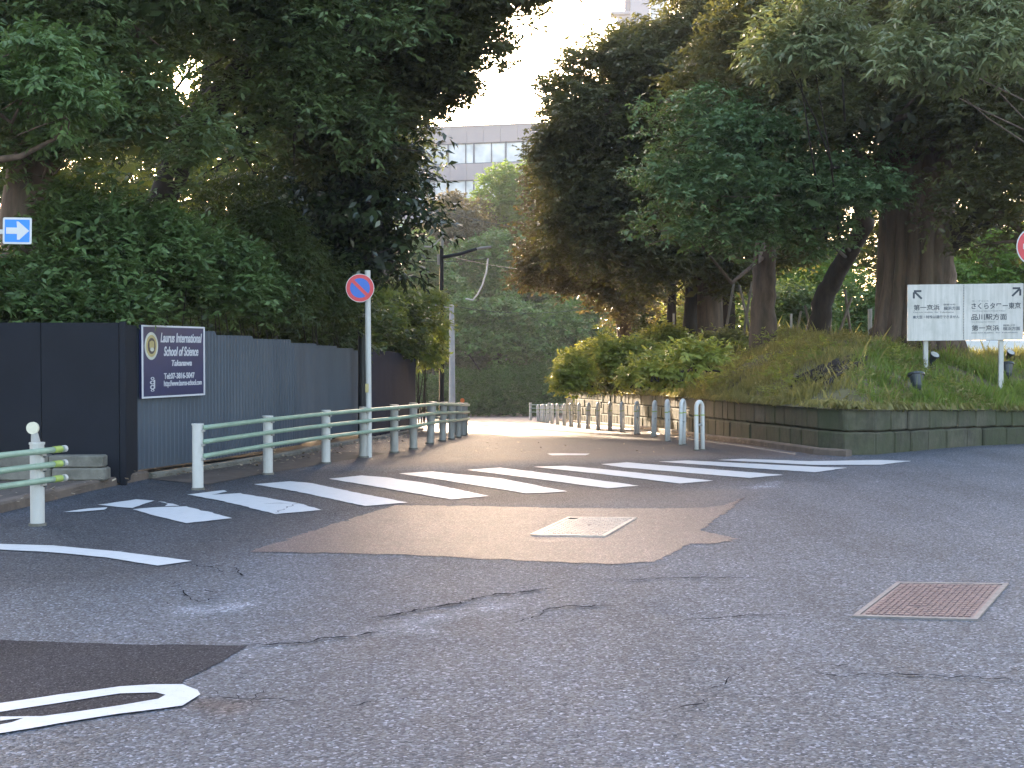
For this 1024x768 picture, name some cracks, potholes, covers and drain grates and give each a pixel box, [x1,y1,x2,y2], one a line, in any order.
crack [822,664,1020,682]
crack [662,665,747,711]
crack [372,588,661,623]
crack [160,564,243,604]
crack [685,605,809,620]
manhole cover [530,517,637,537]
